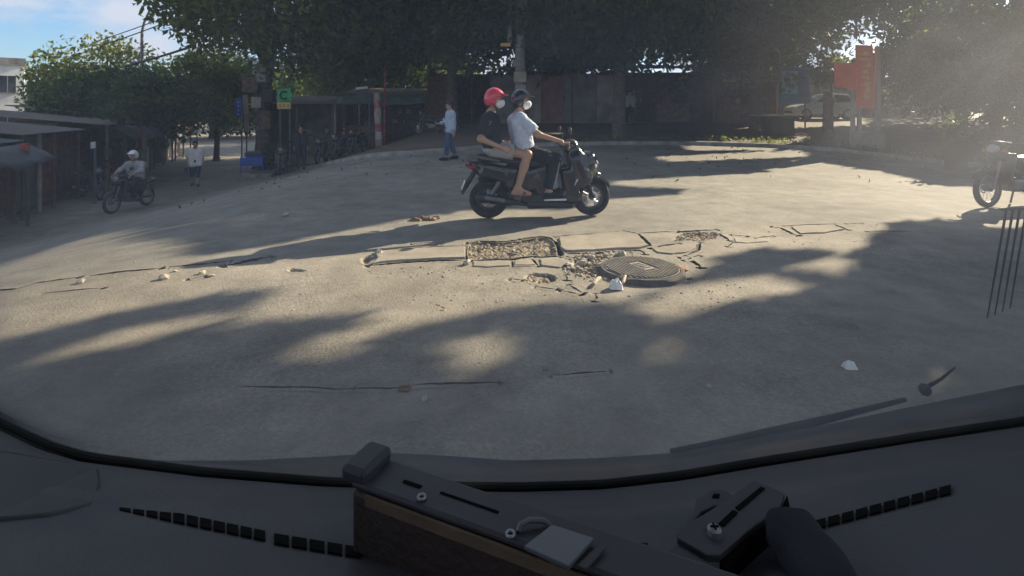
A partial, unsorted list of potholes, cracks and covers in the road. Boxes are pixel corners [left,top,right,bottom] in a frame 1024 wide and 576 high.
crack [0,255,271,295]
crack [236,379,498,393]
pothole [467,237,558,261]
crack [552,368,612,379]
manhole cover [596,256,687,287]
pothole [523,272,559,285]
crack [467,235,603,302]
crack [772,226,801,236]
crack [625,230,746,280]
